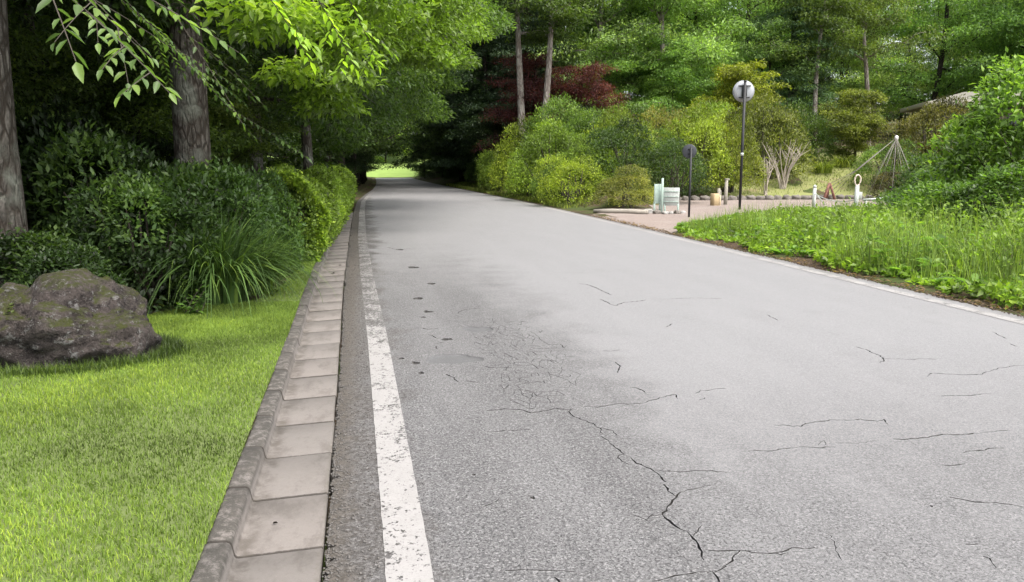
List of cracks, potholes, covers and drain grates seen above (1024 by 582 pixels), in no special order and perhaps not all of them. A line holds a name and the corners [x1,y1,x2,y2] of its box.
crack [446,319,815,582]
crack [900,430,1008,466]
crack [753,419,886,451]
crack [858,347,1022,377]
